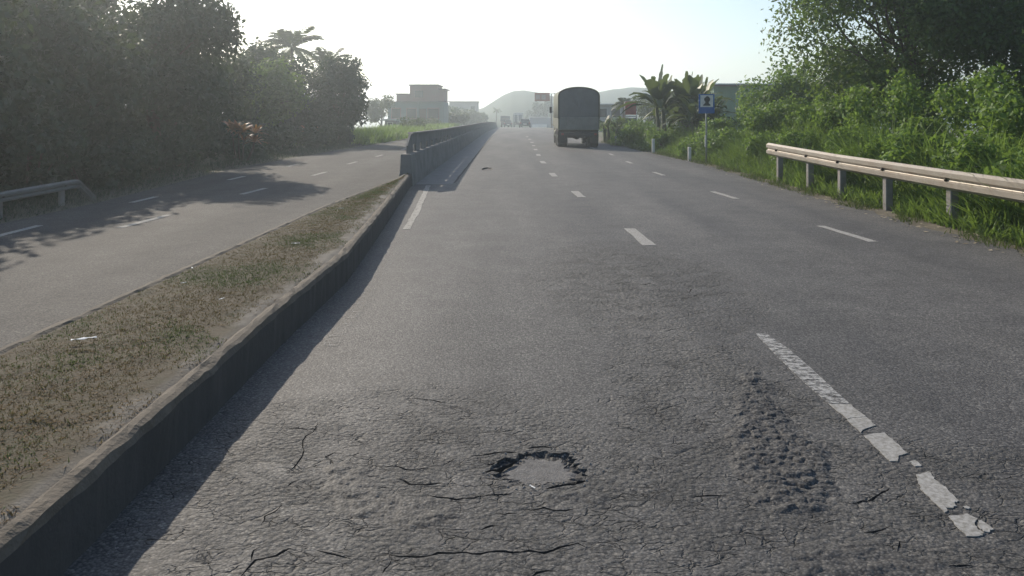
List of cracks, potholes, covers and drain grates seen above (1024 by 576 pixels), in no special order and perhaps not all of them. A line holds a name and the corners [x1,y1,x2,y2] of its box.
crack [865,527,901,552]
crack [854,488,890,504]
crack [367,443,587,576]
crack [283,423,361,486]
crack [241,546,291,576]
pothole [482,441,608,493]
